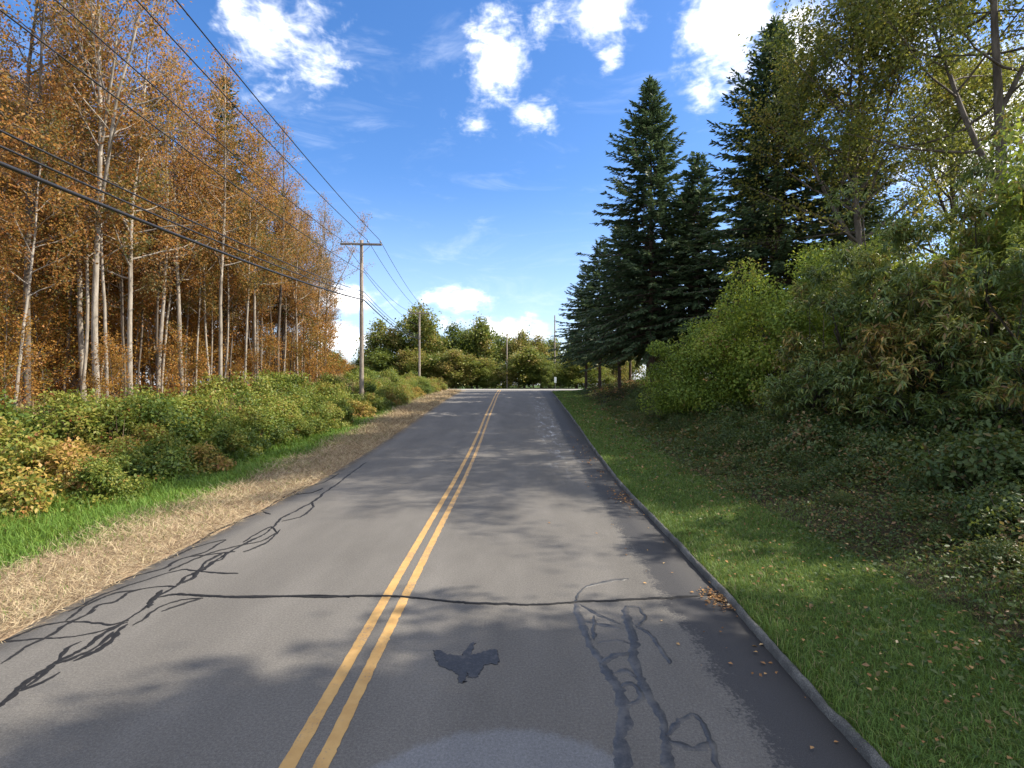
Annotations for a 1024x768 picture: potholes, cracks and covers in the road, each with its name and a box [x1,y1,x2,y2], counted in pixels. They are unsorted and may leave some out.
crack [573,578,721,768]
